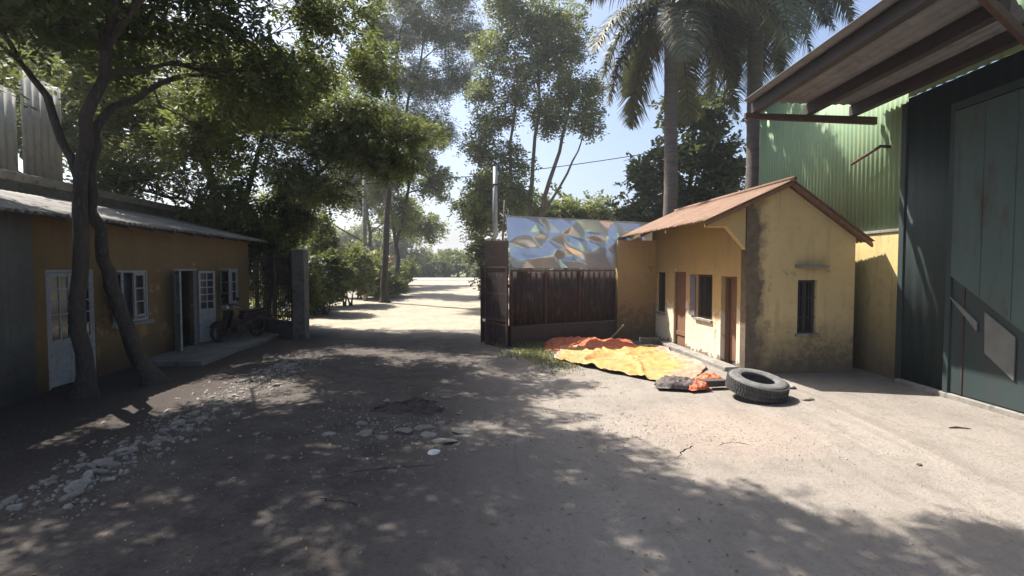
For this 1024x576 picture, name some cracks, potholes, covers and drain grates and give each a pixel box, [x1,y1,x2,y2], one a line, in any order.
crack [316,497,368,508]
crack [327,464,434,479]
pothole [368,397,447,418]
